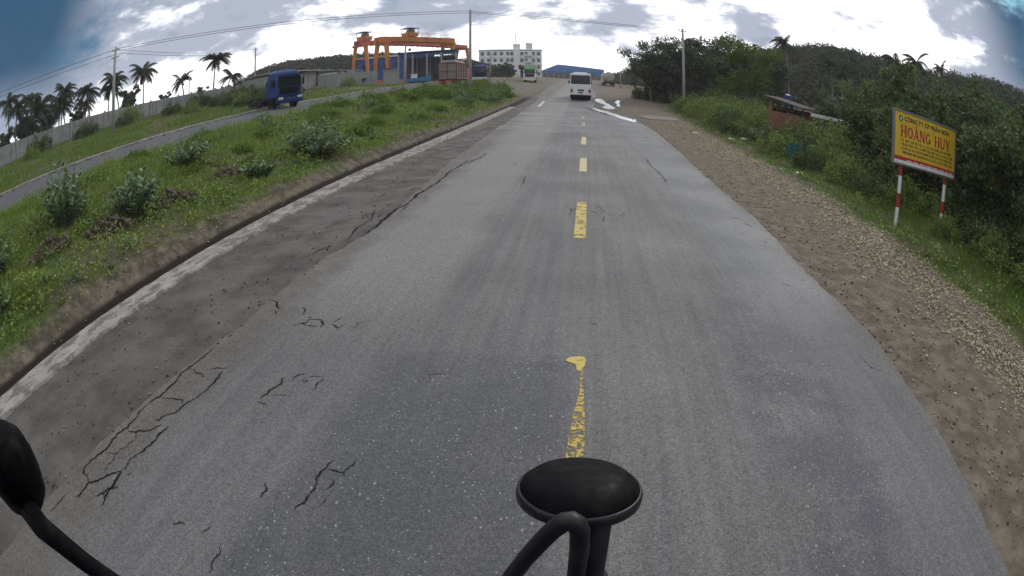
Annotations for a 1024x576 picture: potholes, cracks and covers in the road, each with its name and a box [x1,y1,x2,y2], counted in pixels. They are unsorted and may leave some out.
crack [271,300,363,328]
crack [295,459,357,509]
crack [51,348,227,510]
crack [349,153,486,238]
crack [257,373,324,406]
crack [172,521,234,571]
